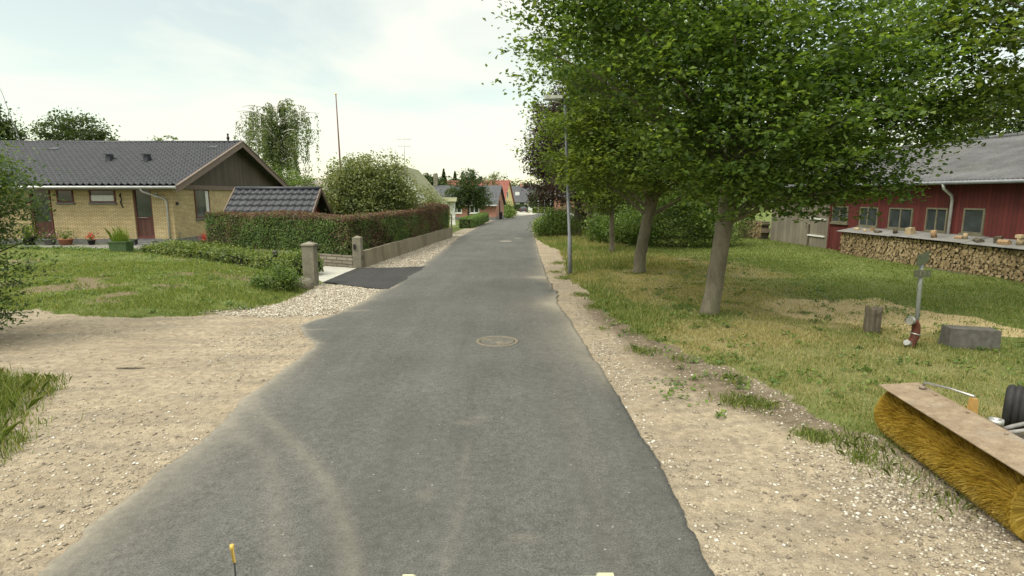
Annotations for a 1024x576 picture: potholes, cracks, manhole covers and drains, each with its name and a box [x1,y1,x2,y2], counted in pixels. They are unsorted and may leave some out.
manhole cover [476,336,518,347]
